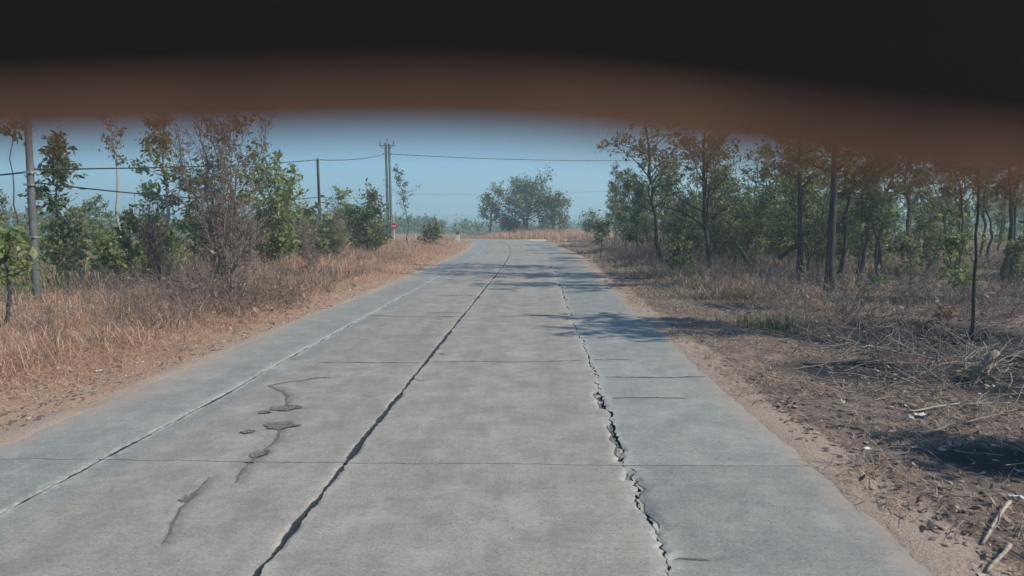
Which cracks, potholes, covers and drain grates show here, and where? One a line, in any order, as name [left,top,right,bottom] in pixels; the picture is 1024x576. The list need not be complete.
crack [0,242,710,576]
